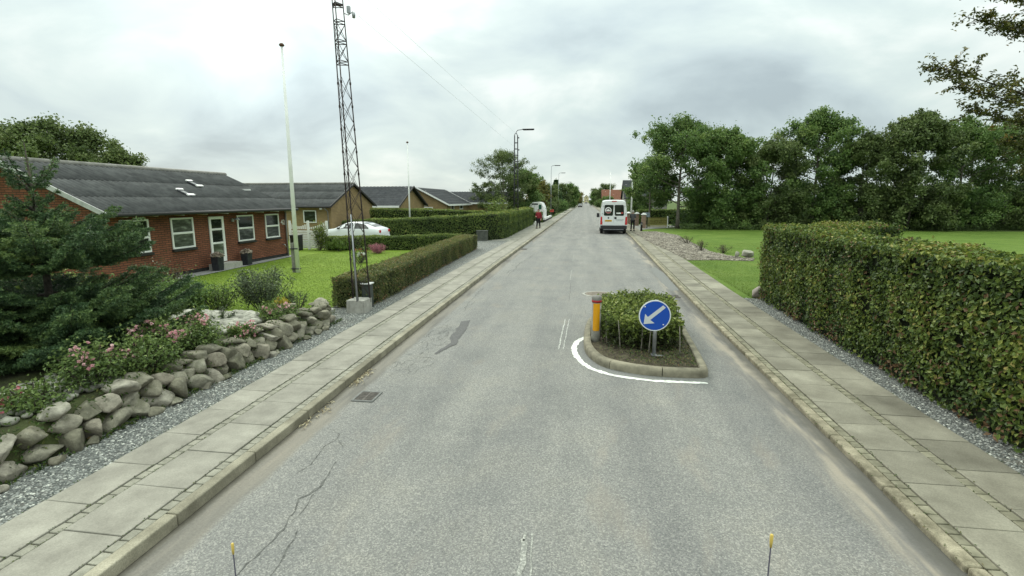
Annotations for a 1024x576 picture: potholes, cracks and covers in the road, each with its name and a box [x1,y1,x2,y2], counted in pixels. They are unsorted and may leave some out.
drain grate [351,391,383,402]
crack [236,429,343,576]
crack [390,290,482,376]
